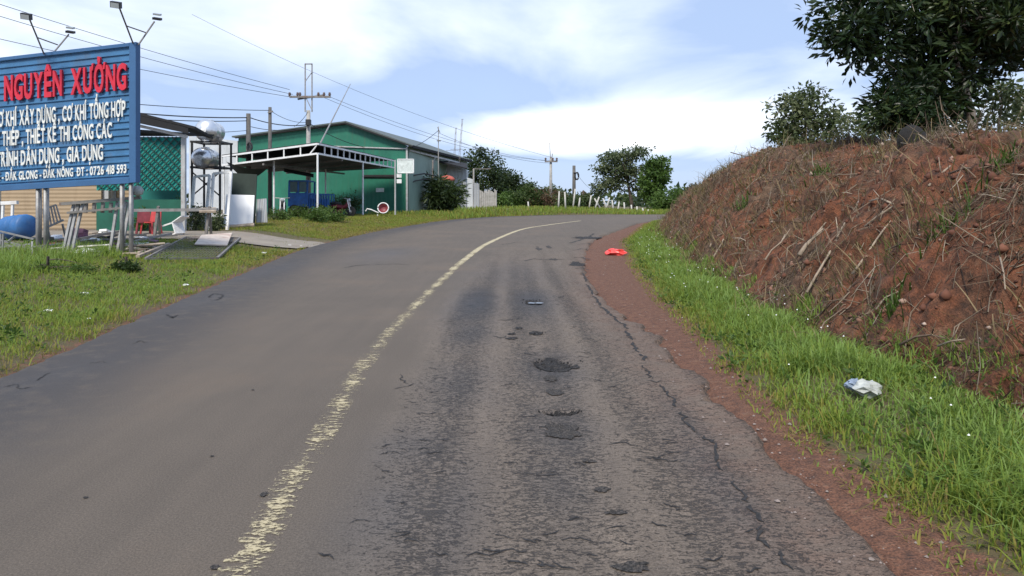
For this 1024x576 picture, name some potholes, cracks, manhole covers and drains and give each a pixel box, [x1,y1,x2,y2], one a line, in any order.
pothole [609,560,650,572]
crack [502,233,794,570]
crack [391,516,634,568]
pothole [533,358,583,372]
pothole [545,421,582,439]
